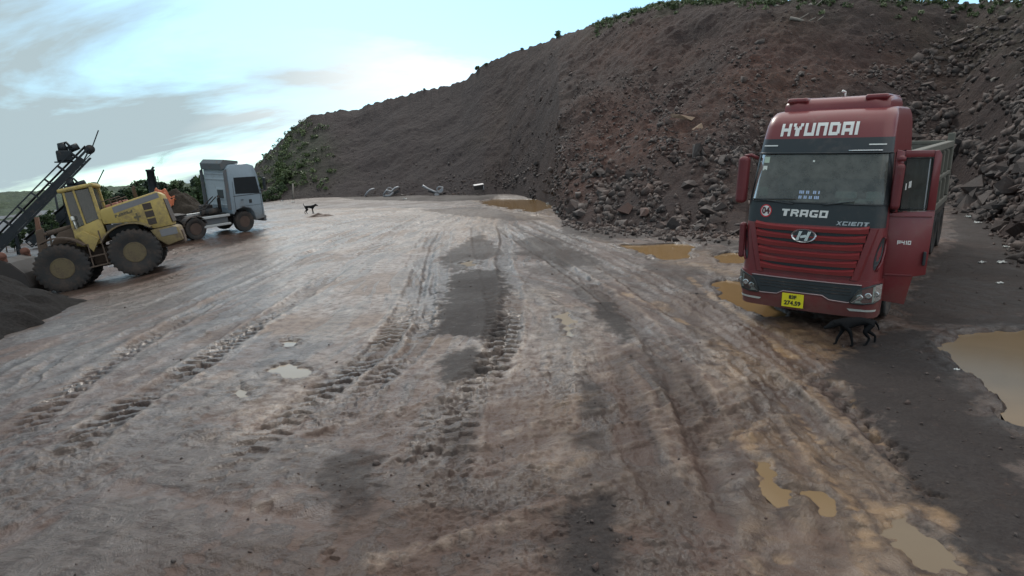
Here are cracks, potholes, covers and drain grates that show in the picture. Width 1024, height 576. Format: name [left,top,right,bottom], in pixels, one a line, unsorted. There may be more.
pothole [860,504,988,576]
pothole [735,450,805,518]
pothole [269,334,311,349]
pothole [257,358,324,385]
